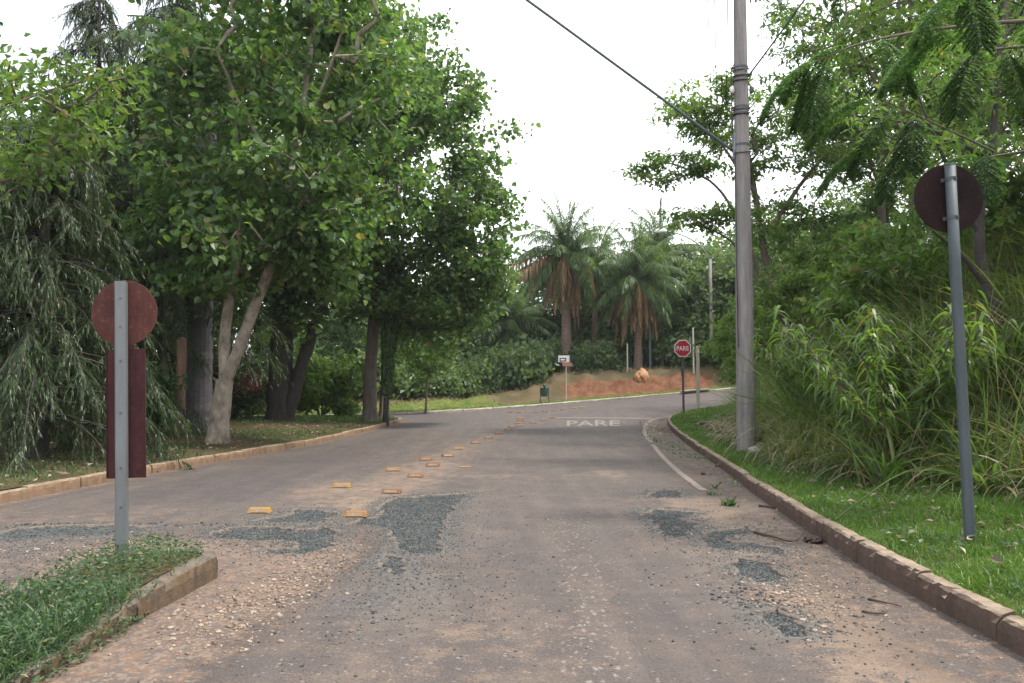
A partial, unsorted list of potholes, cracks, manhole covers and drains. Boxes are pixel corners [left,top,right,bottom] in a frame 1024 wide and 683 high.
pothole [321,490,483,559]
pothole [672,521,819,558]
pothole [624,506,721,539]
pothole [0,520,172,542]
pothole [629,487,700,499]
